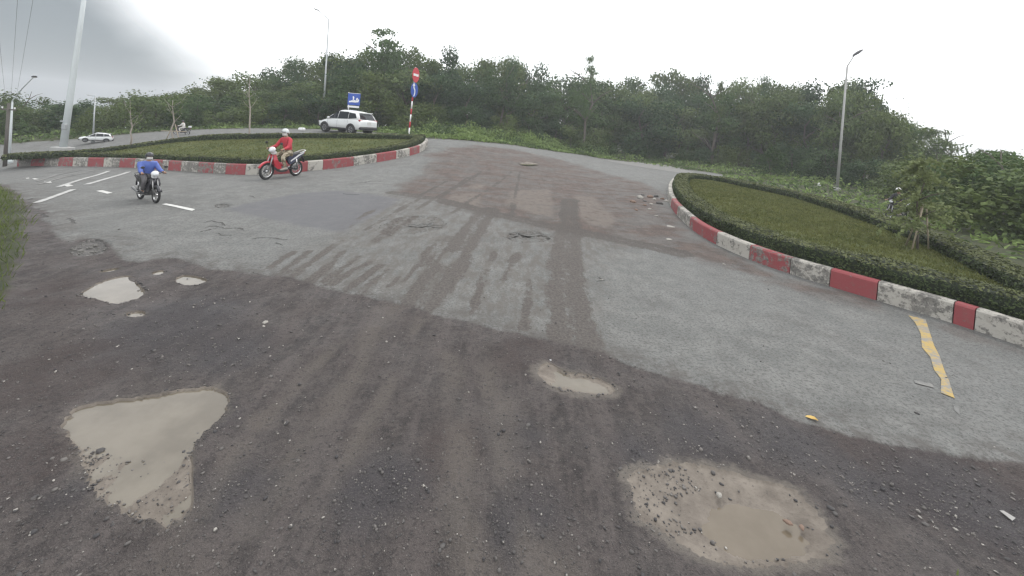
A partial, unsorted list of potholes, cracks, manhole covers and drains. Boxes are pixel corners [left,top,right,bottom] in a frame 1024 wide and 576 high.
pothole [492,227,565,247]
pothole [57,271,162,310]
pothole [38,378,249,551]
pothole [521,356,632,405]
pothole [609,450,859,576]
pothole [157,271,224,292]
pothole [365,213,460,241]
